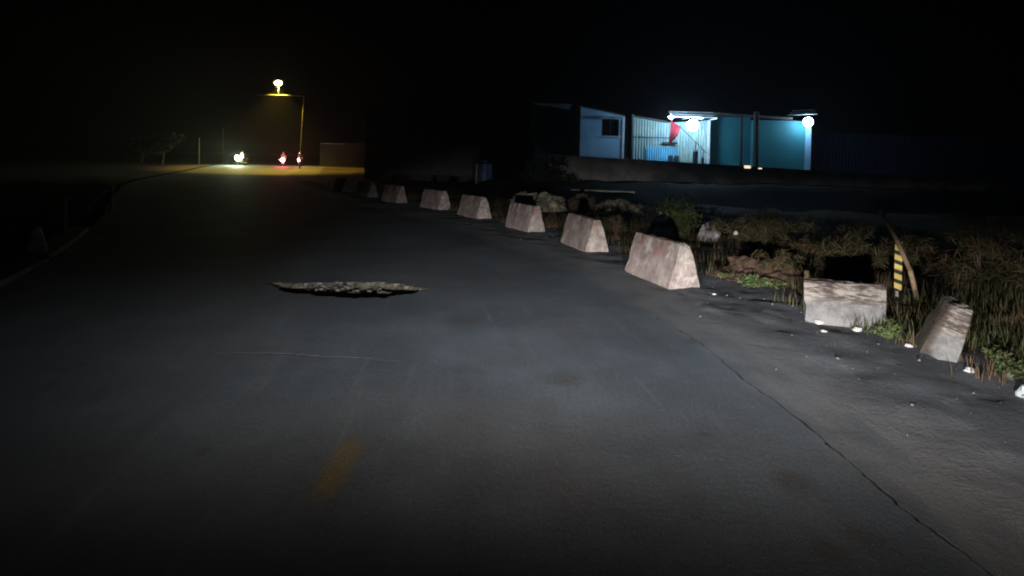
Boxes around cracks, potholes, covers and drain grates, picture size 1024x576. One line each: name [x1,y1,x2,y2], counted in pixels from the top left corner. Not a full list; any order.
crack [224,352,389,361]
pothole [264,281,428,299]
crack [644,310,996,576]
